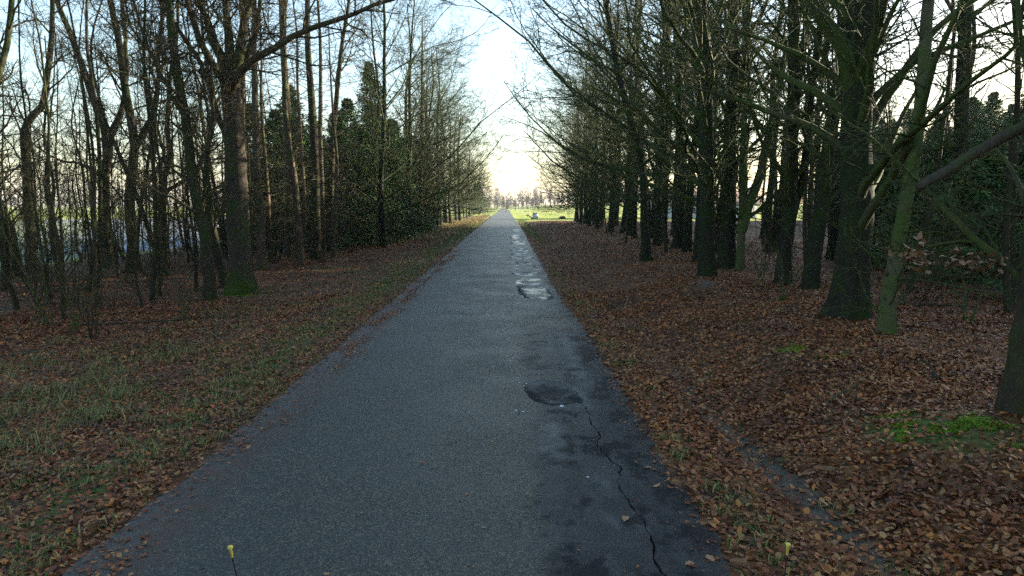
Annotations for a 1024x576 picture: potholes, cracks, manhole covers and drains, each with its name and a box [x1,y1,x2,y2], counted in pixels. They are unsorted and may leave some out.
pothole [523,370,584,406]
pothole [515,278,554,300]
crack [528,395,666,576]
